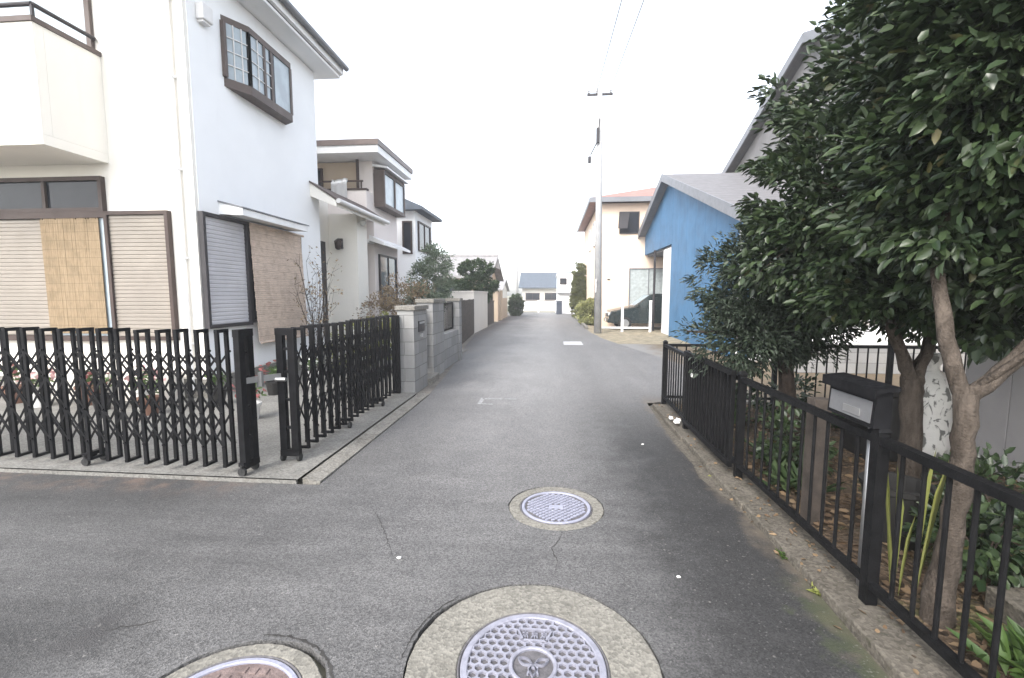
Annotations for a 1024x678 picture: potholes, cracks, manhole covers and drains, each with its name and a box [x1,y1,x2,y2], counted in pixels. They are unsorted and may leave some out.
manhole cover [404,585,663,678]
manhole cover [509,487,604,531]
manhole cover [165,643,322,678]
